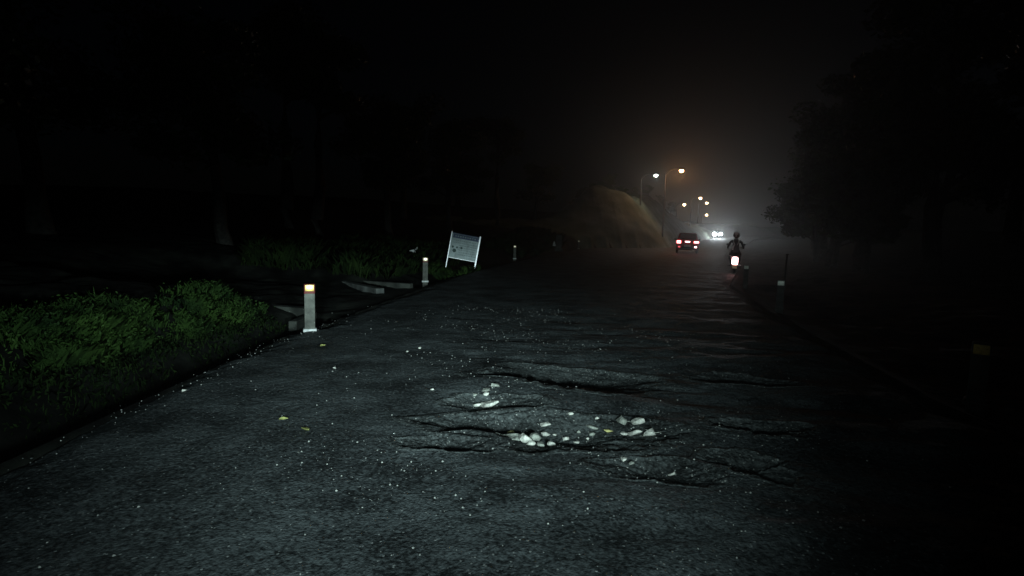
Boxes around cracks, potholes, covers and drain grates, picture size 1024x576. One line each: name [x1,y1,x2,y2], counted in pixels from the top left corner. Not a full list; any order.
pothole [391,406,718,456]
pothole [436,392,561,420]
